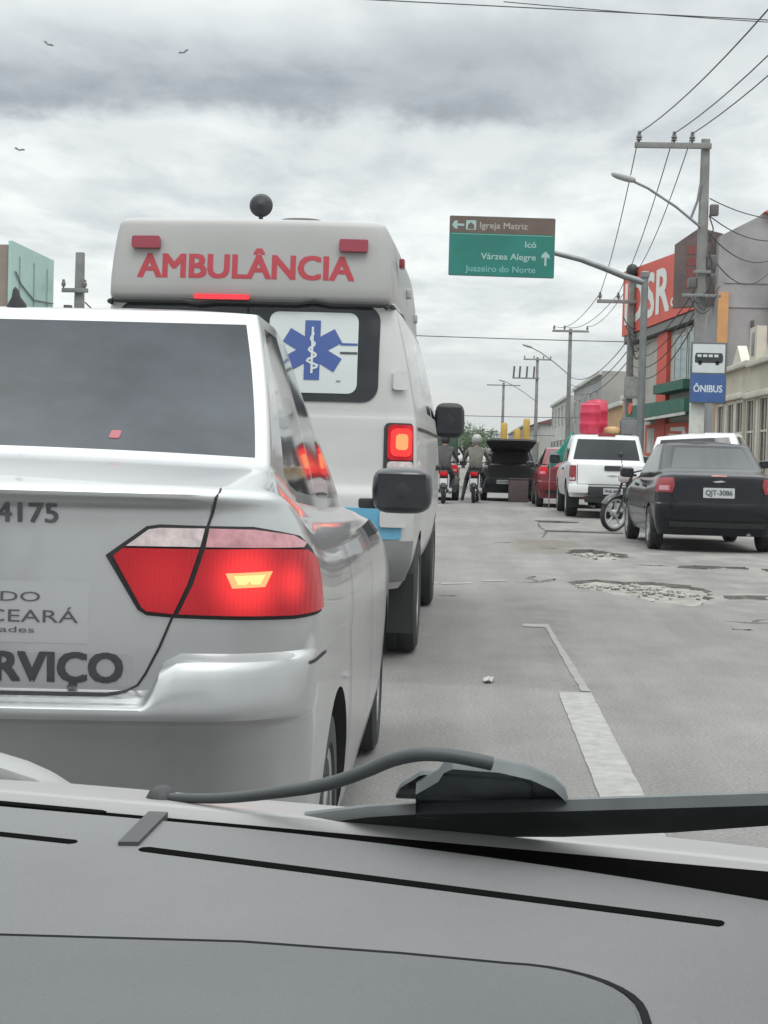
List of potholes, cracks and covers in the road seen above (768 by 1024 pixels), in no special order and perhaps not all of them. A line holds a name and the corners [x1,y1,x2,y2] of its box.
pothole [566,549,628,561]
pothole [567,579,713,606]
crack [728,619,768,631]
crack [538,523,559,549]
